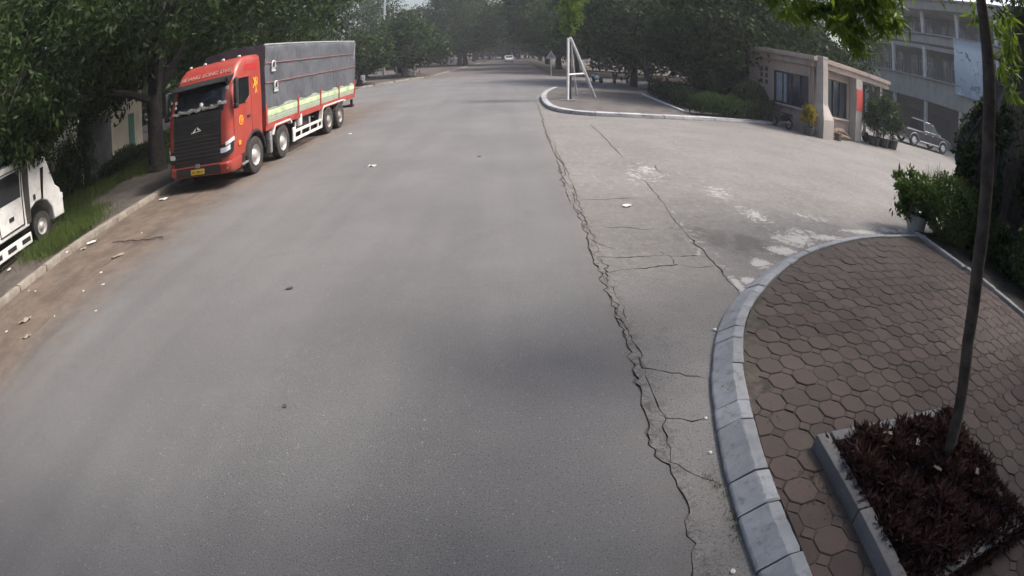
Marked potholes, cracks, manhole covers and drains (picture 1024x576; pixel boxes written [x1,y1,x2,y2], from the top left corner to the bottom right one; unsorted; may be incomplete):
crack [537,104,717,576]
